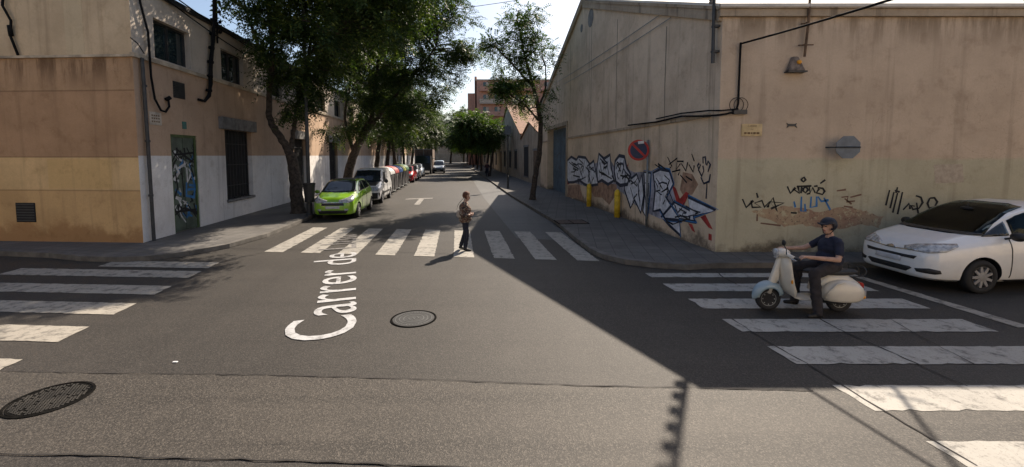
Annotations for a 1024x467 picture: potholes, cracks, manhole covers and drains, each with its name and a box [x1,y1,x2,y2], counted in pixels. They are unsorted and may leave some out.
manhole cover [0,381,96,419]
manhole cover [390,310,437,328]
